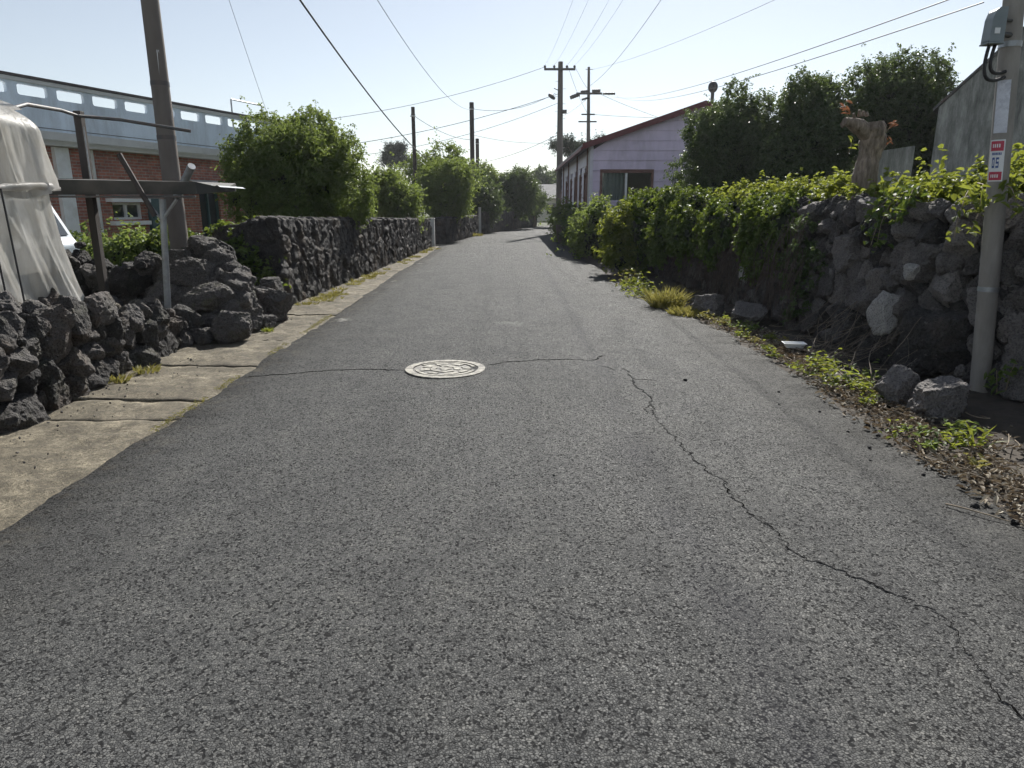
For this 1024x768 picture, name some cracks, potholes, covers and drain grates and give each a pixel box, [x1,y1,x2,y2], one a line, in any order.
manhole cover [405,360,485,379]
crack [489,355,1024,720]
crack [239,369,403,378]
